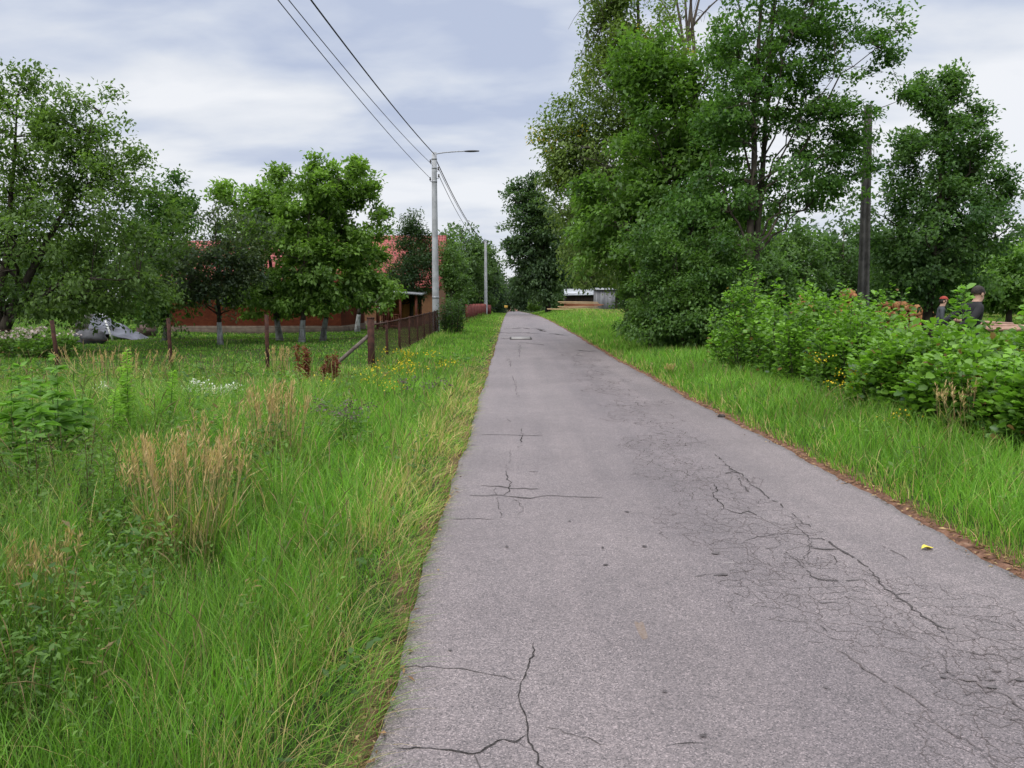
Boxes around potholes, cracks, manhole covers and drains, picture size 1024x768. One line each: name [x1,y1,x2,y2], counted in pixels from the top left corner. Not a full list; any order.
crack [484,418,539,442]
crack [449,471,602,519]
crack [502,329,1024,768]
crack [402,646,605,768]
